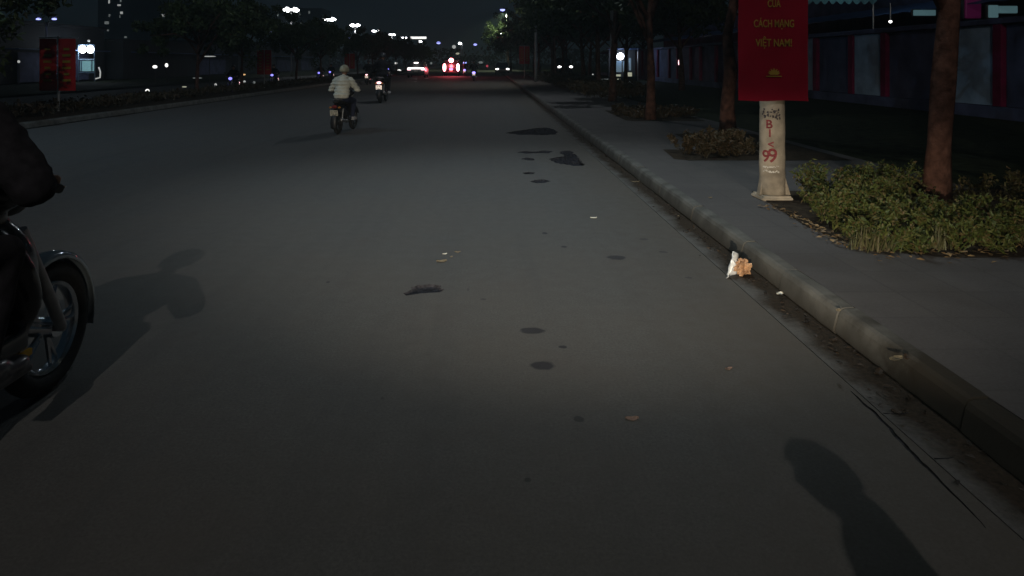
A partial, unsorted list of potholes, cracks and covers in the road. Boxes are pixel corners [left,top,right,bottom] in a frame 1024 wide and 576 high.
pothole [549,151,585,166]
